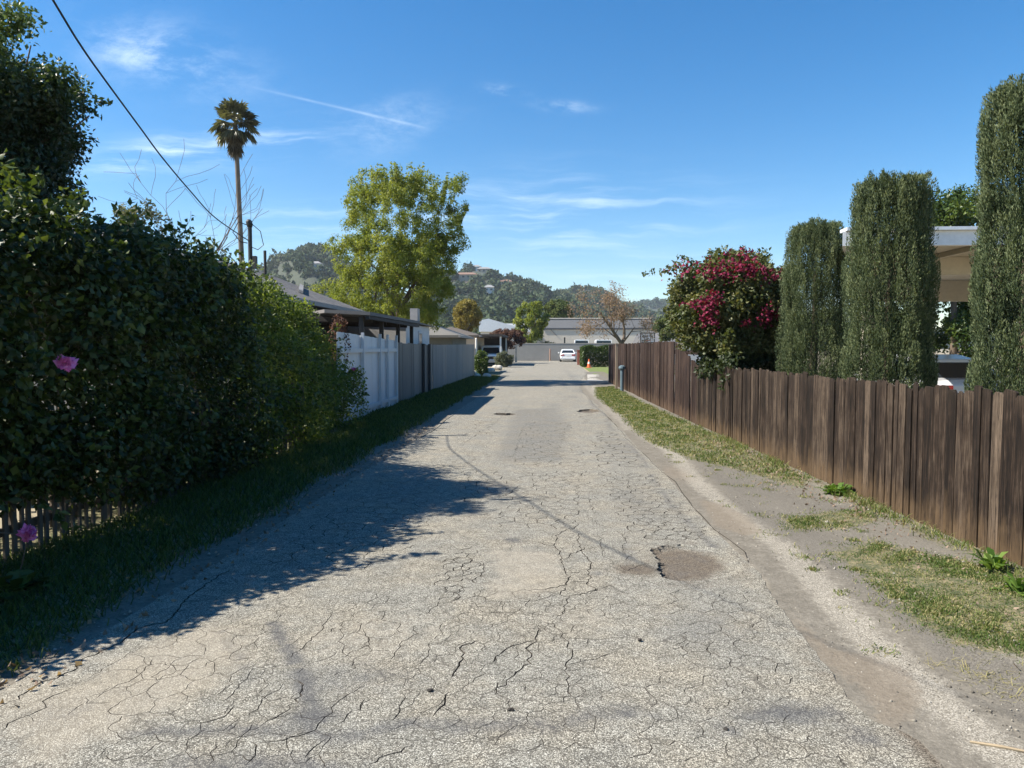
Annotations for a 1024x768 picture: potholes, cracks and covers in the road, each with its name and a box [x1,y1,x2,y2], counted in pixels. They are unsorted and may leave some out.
pothole [650,544,744,581]
crack [0,403,851,767]
